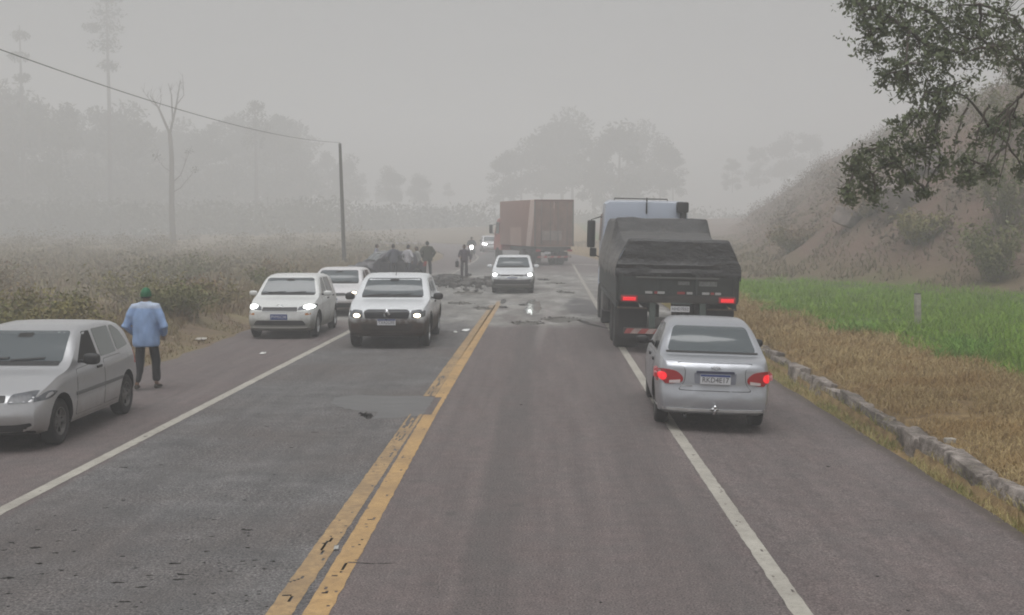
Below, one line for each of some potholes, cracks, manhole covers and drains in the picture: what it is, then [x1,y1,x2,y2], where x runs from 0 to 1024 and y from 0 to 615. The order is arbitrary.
crack [320,536,390,573]
crack [577,320,608,328]
